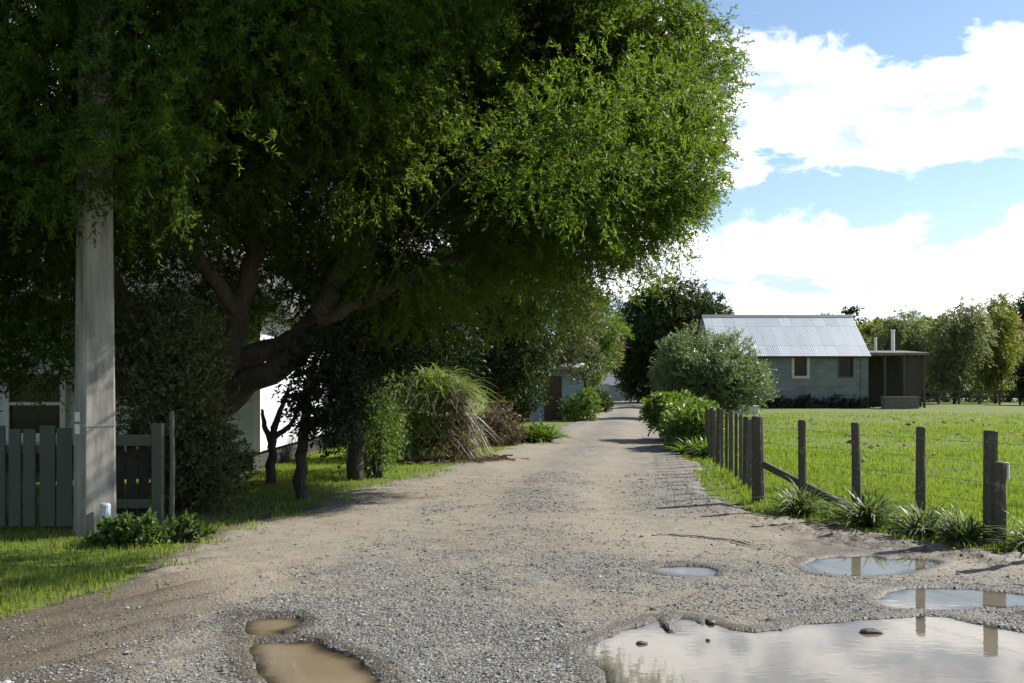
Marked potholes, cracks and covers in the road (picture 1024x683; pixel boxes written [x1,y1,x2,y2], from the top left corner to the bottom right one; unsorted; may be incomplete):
pothole [638,561,732,580]
pothole [789,552,958,578]
pothole [861,583,1024,619]
pothole [225,633,407,683]
pothole [559,608,1024,683]
pothole [222,610,324,646]
